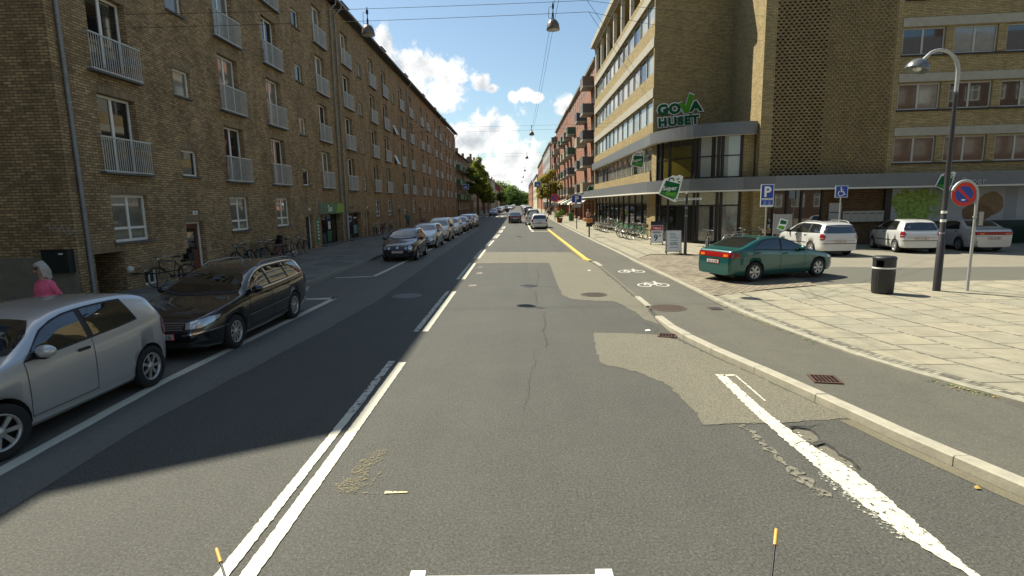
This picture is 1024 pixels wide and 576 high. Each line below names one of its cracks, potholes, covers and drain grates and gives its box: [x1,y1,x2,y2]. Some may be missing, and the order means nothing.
drain grate [807,374,844,385]
pothole [809,442,861,470]
pothole [790,426,821,442]
manhole cover [649,304,687,312]
crack [524,272,556,409]
